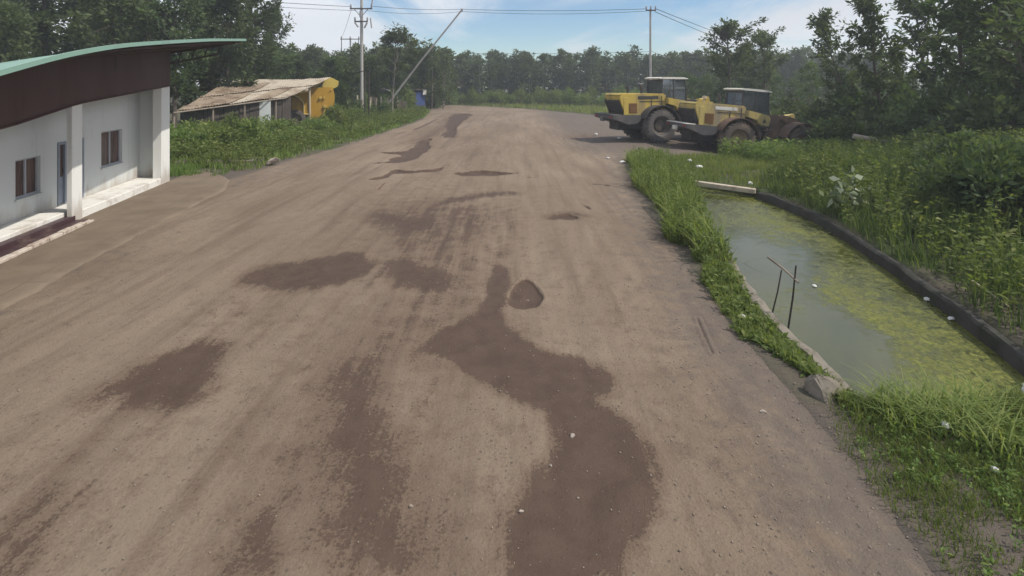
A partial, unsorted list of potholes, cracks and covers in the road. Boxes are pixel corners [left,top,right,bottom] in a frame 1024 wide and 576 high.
pothole [502,278,548,311]
